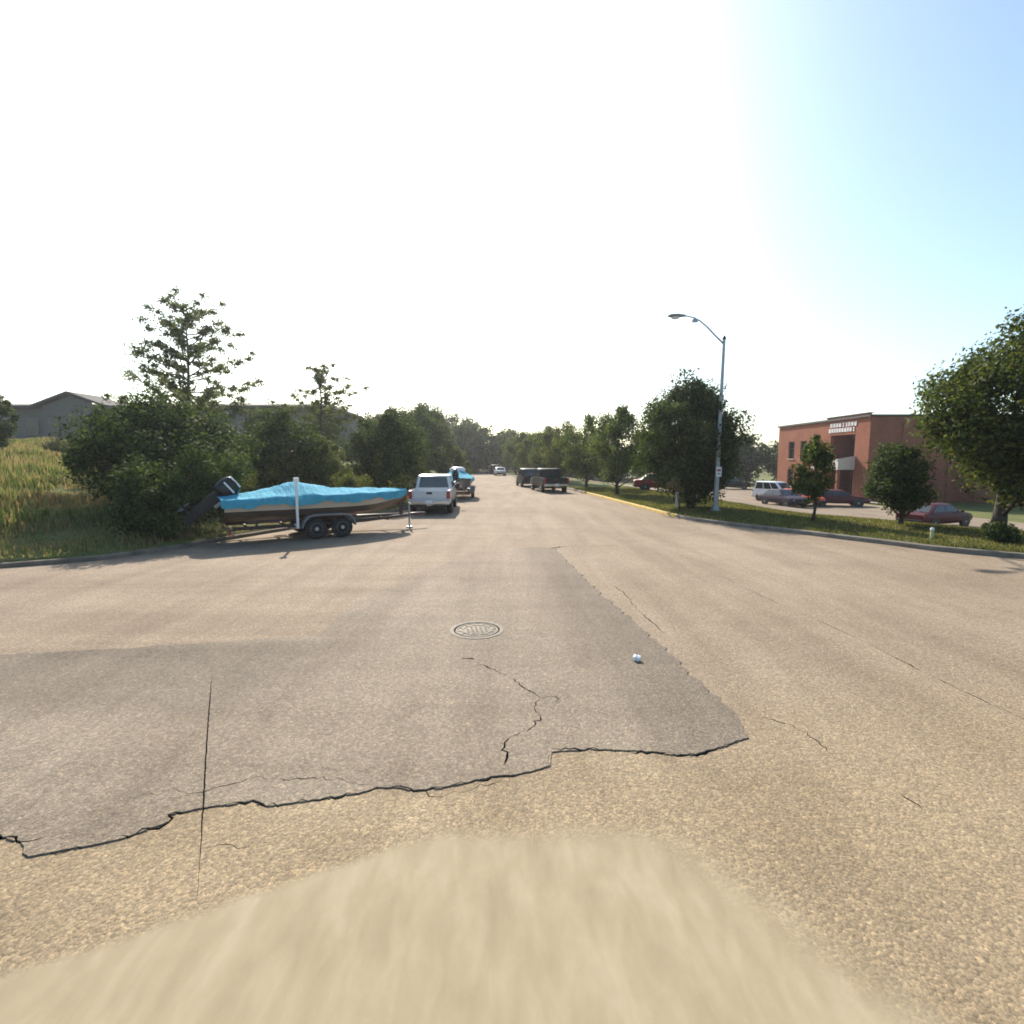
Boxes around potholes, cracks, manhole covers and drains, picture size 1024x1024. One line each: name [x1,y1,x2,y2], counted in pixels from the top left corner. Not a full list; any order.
crack [576,740,743,757]
crack [724,577,1021,718]
manhole cover [449,621,504,639]
crack [0,667,552,858]
